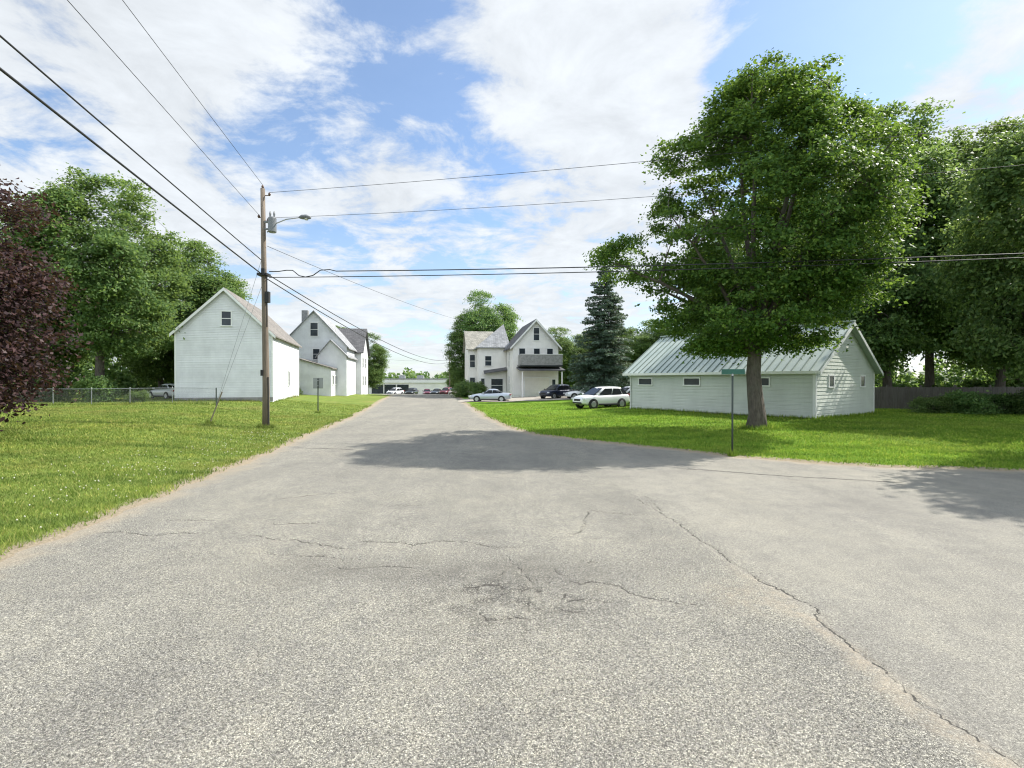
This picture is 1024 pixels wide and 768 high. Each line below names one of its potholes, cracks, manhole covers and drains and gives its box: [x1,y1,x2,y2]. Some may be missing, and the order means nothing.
crack [634,495,1019,766]
crack [259,523,696,621]
crack [100,520,212,536]
